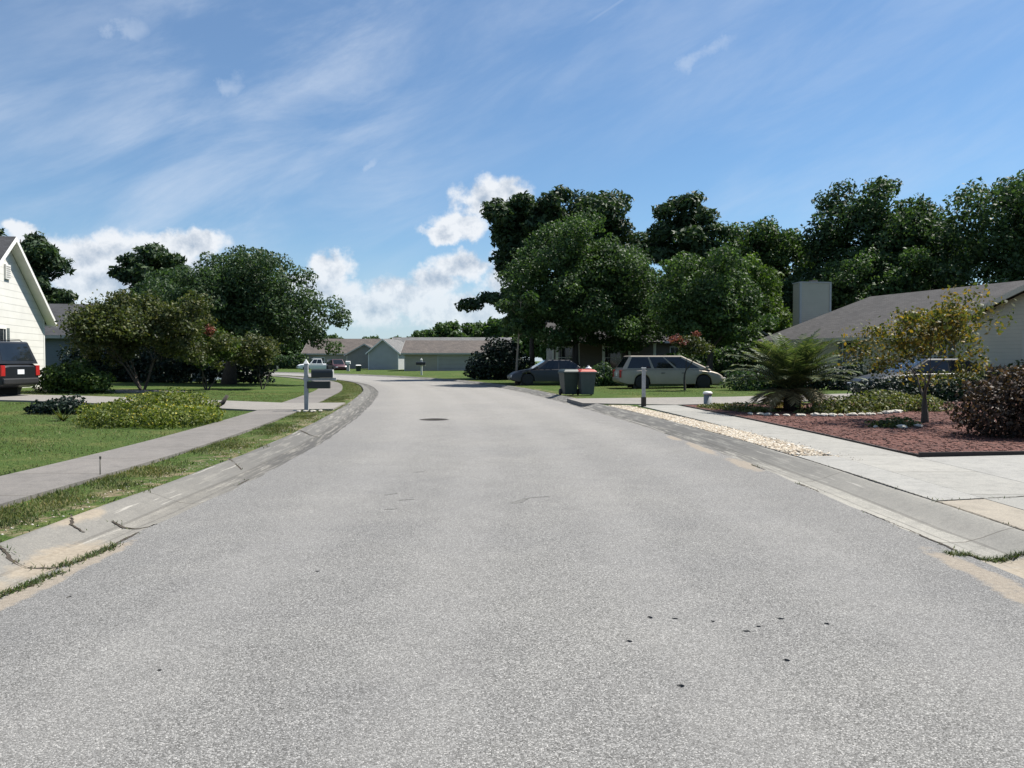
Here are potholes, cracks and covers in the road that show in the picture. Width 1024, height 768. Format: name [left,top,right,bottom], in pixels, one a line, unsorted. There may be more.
crack [0,513,123,597]
